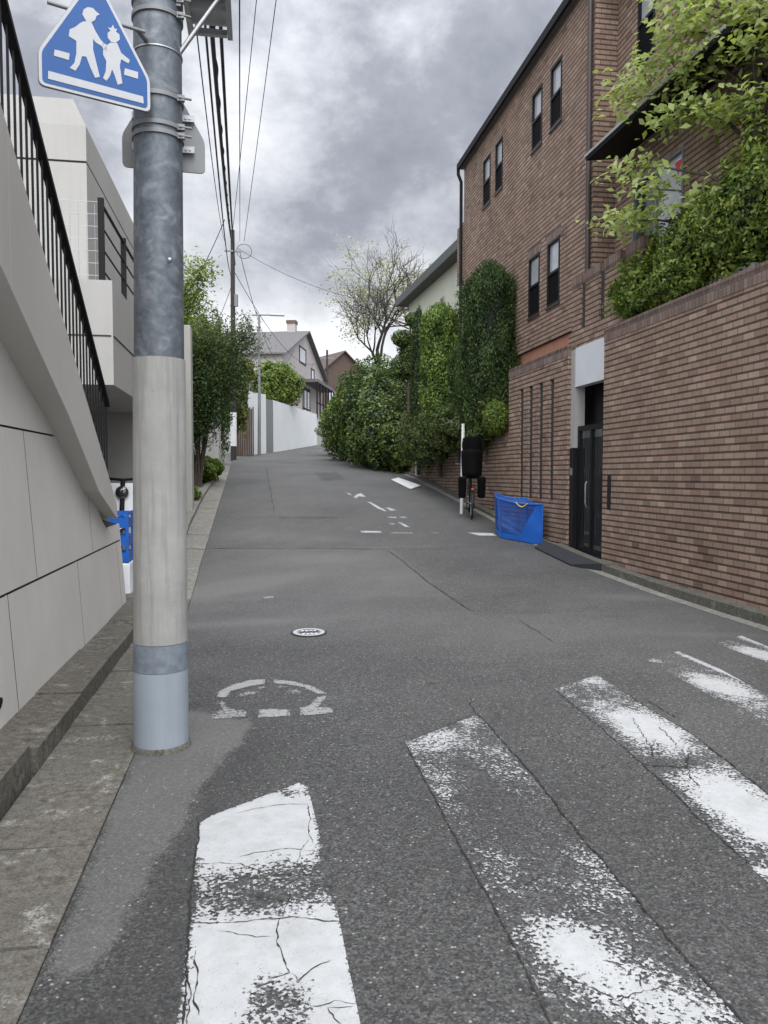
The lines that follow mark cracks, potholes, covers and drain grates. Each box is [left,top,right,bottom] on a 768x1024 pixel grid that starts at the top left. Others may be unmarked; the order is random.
manhole cover [291,628,327,637]
crack [389,551,477,611]
